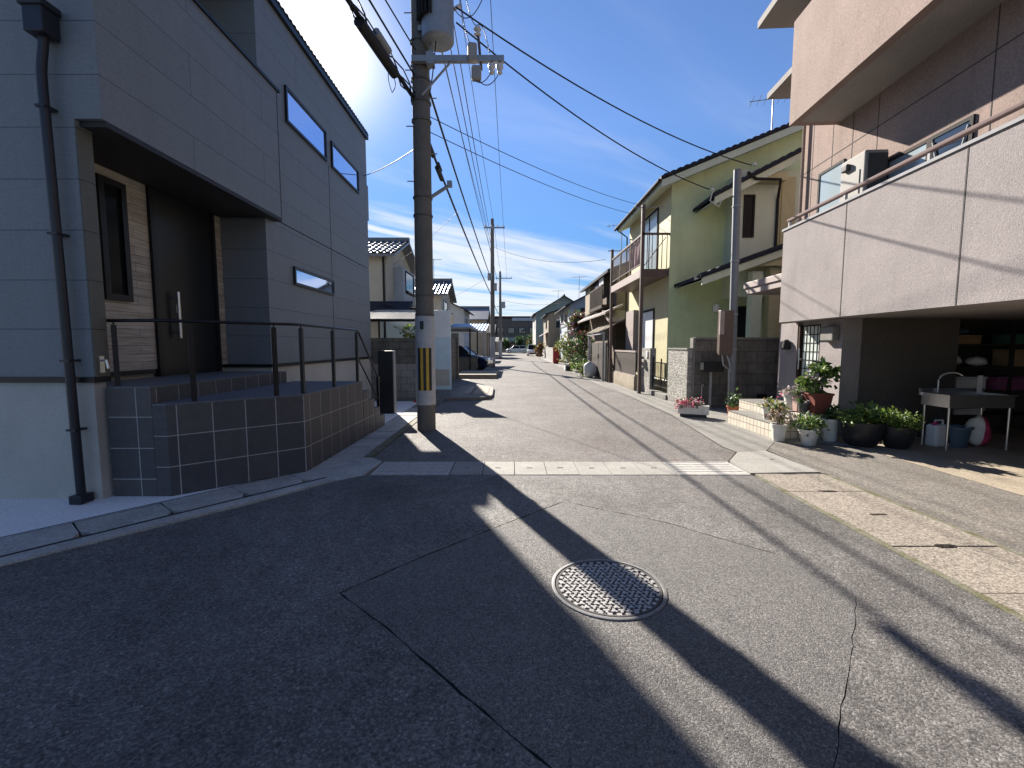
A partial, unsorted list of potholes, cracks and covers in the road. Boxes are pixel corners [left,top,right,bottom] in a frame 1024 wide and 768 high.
crack [833,602,857,768]
manhole cover [551,559,668,621]
